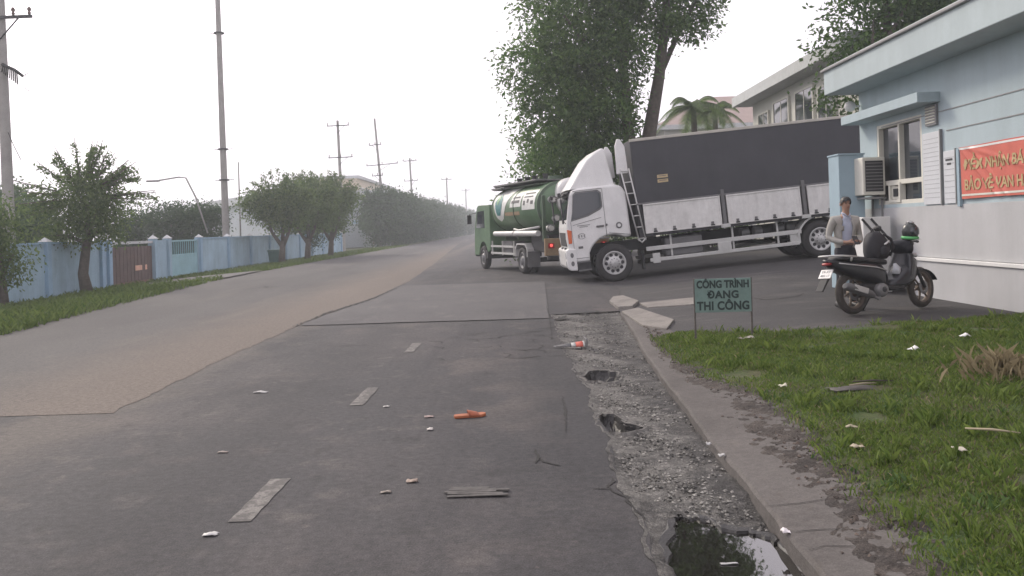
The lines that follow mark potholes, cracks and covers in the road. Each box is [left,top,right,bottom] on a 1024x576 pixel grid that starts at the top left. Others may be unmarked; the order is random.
pothole [659,513,805,576]
pothole [593,412,649,437]
pothole [580,369,624,385]
crack [534,449,561,466]
crack [597,478,646,520]
